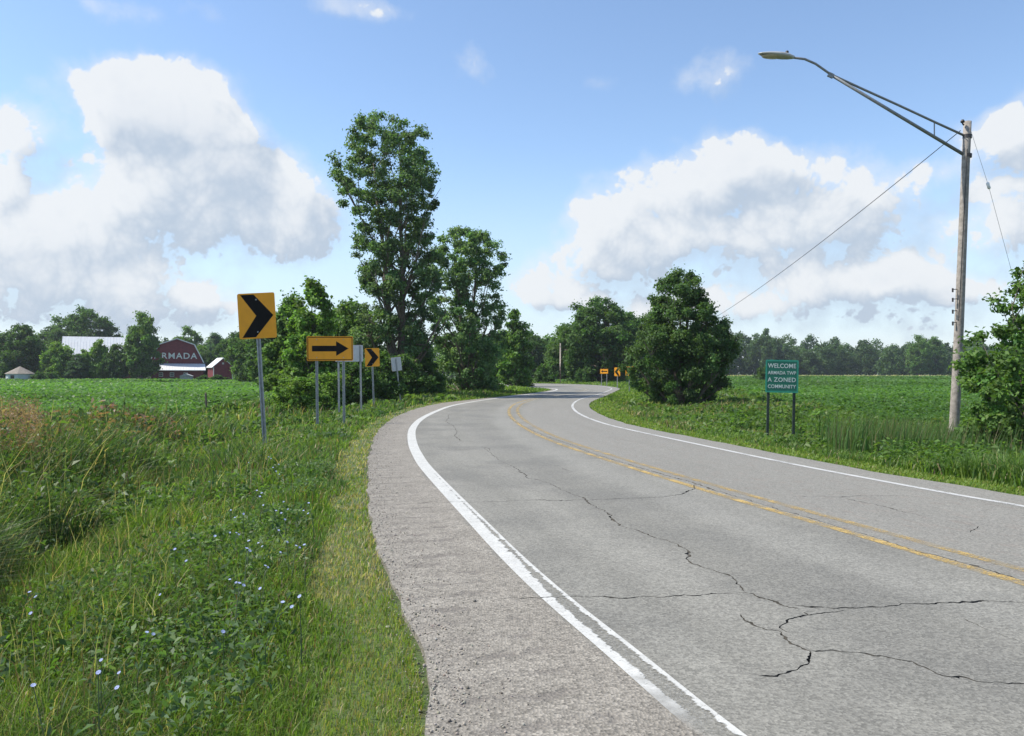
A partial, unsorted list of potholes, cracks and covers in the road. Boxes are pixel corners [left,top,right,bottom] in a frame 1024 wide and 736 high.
crack [422,415,1024,684]
